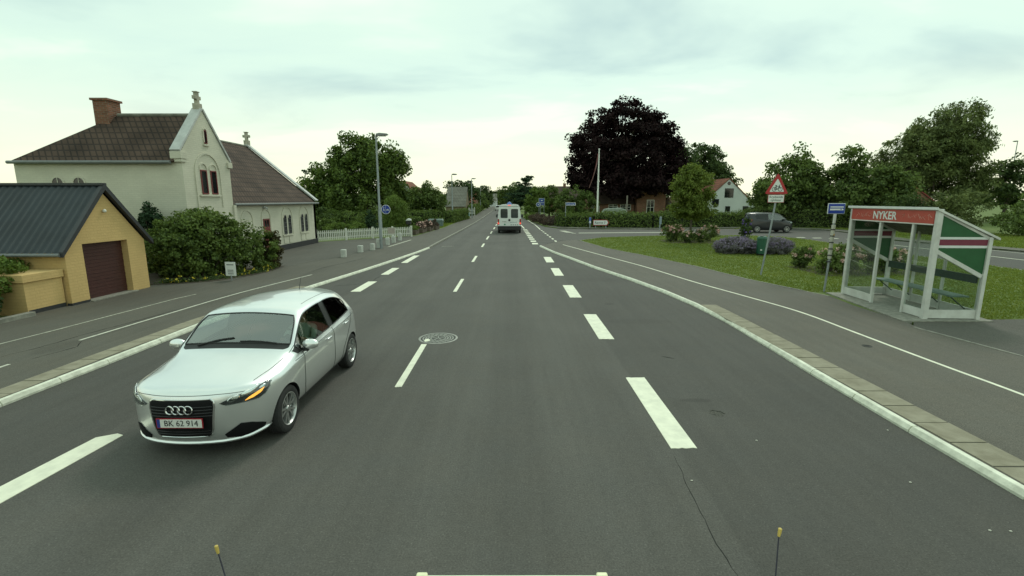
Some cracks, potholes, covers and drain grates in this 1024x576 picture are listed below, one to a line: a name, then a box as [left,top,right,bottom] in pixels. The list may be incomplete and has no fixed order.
crack [673,454,738,576]
manhole cover [419,333,458,344]
